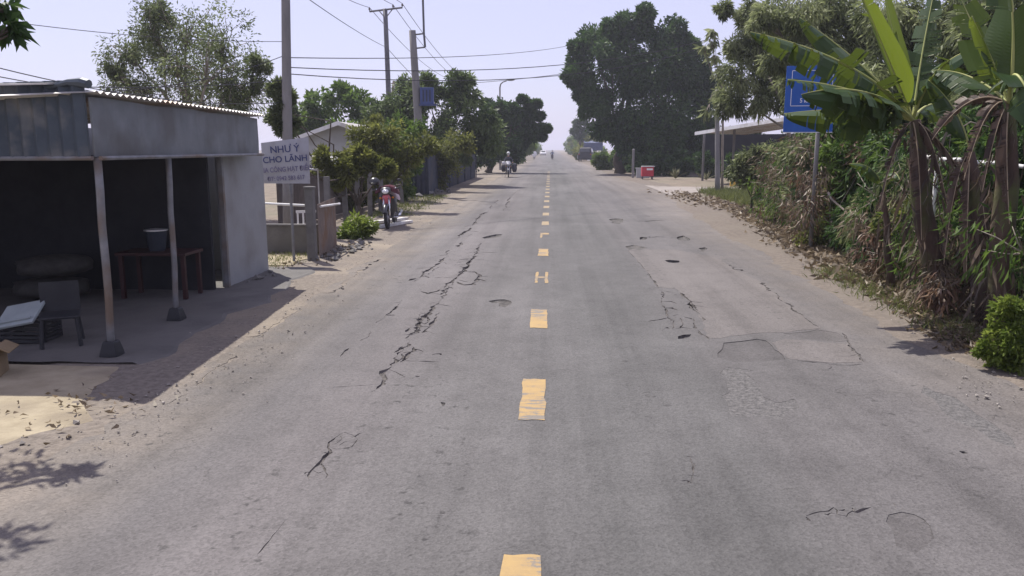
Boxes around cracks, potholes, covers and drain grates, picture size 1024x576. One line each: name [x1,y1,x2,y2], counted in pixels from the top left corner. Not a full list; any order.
pothole [489,299,512,307]
crack [806,507,871,521]
crack [340,191,517,389]
crack [305,432,360,479]
